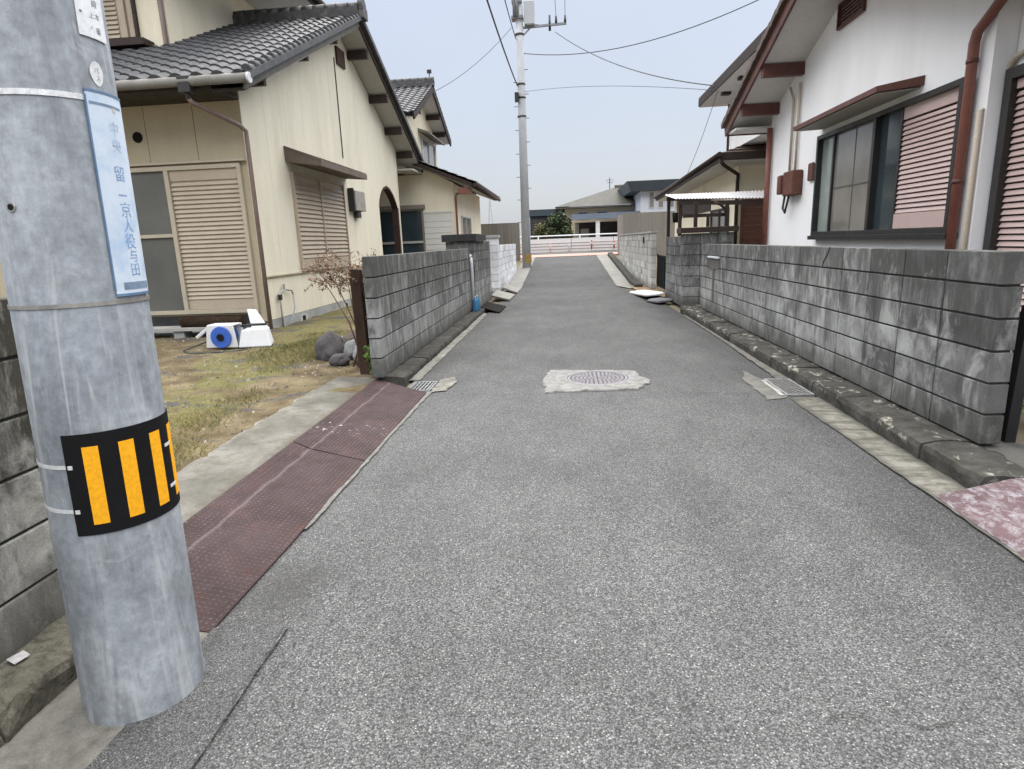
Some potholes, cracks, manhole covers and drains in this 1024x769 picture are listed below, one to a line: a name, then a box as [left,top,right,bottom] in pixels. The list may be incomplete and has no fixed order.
crack [819,701,968,728]
drain grate [408,381,438,392]
drain grate [764,378,815,398]
